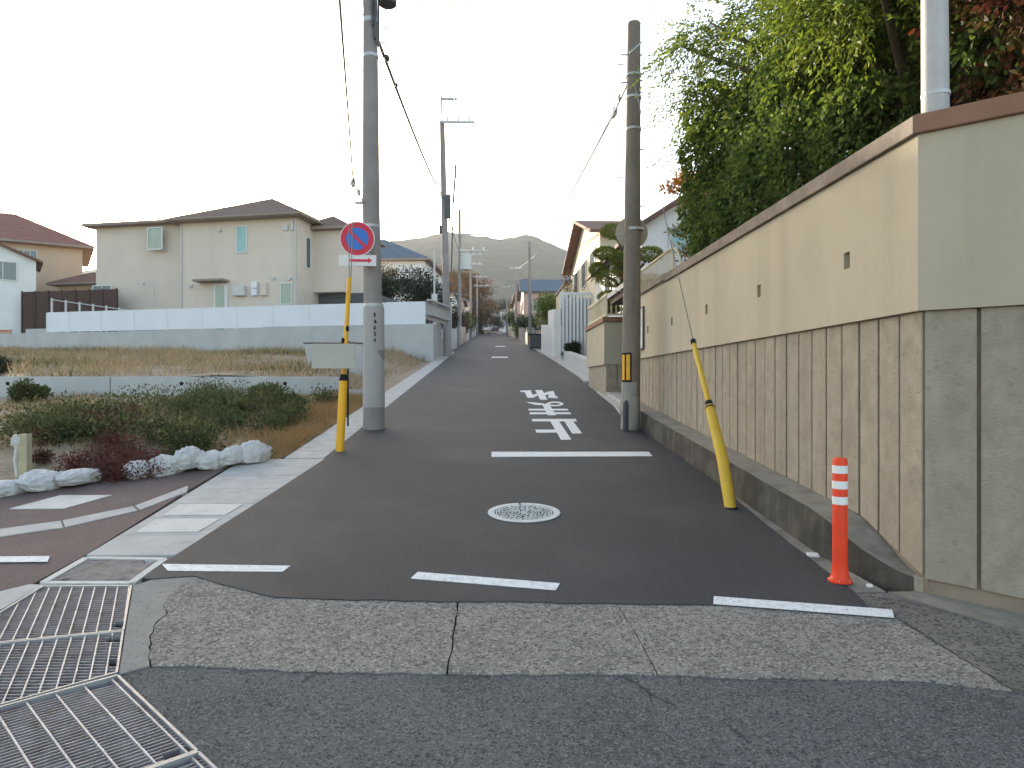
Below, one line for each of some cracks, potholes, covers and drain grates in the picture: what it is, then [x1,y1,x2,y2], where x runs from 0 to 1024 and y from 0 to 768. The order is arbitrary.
crack [618,605,677,706]
drain grate [40,556,168,589]
drain grate [0,674,198,768]
crack [446,605,458,675]
crack [148,595,170,667]
manhole cover [488,503,560,523]
drain grate [0,585,132,642]
drain grate [0,630,124,706]
